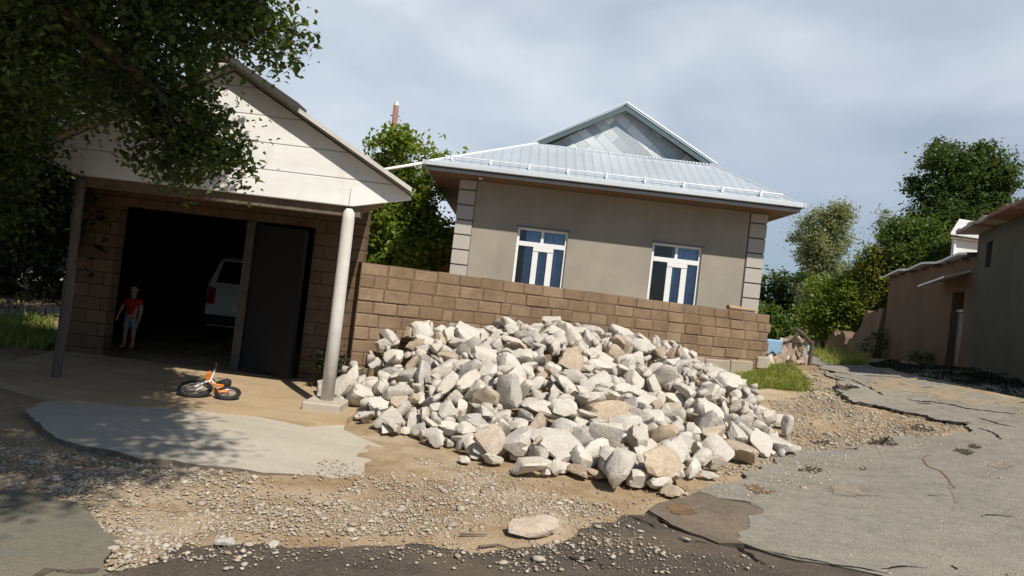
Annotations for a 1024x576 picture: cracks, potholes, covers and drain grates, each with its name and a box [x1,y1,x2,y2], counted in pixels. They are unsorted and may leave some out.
crack [627,511,924,574]
crack [832,371,1017,438]
crack [922,454,960,511]
